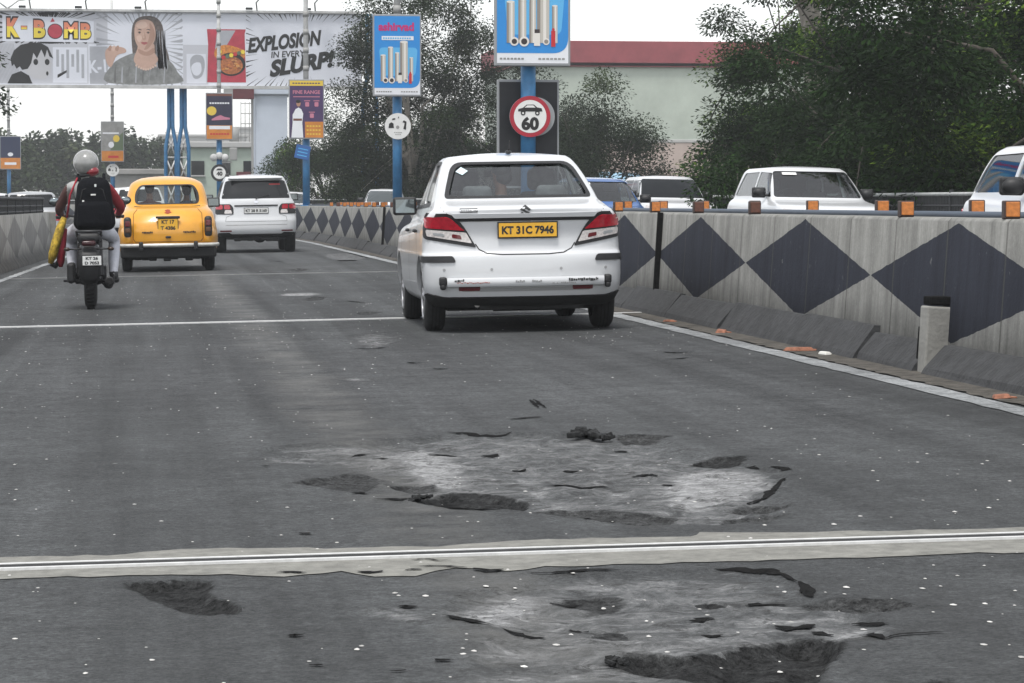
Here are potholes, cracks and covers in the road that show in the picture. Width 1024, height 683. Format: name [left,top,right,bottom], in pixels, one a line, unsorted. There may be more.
crack [714,567,816,606]
crack [747,465,790,504]
pothole [113,578,254,617]
crack [442,614,544,638]
pothole [255,431,801,527]
pothole [432,567,923,683]
